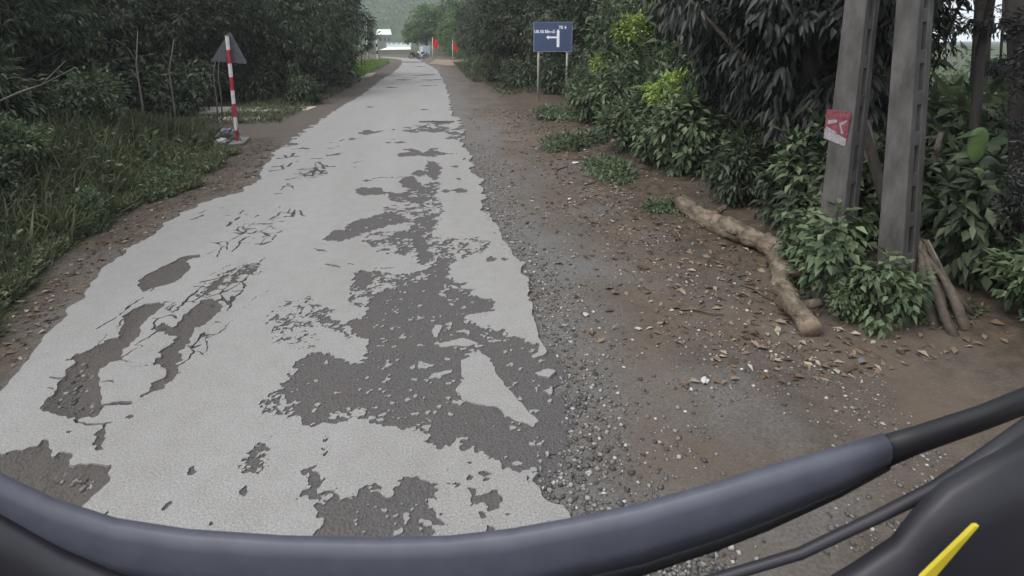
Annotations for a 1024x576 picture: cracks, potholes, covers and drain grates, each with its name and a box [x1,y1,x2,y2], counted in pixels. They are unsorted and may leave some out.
pothole [403,122,453,133]
pothole [362,229,490,262]
pothole [386,182,440,202]
crack [239,148,336,189]
pothole [0,440,111,507]
pothole [145,299,222,395]
pothole [93,429,106,451]
pothole [425,162,442,180]
pothole [40,303,164,420]
pothole [400,176,425,189]
